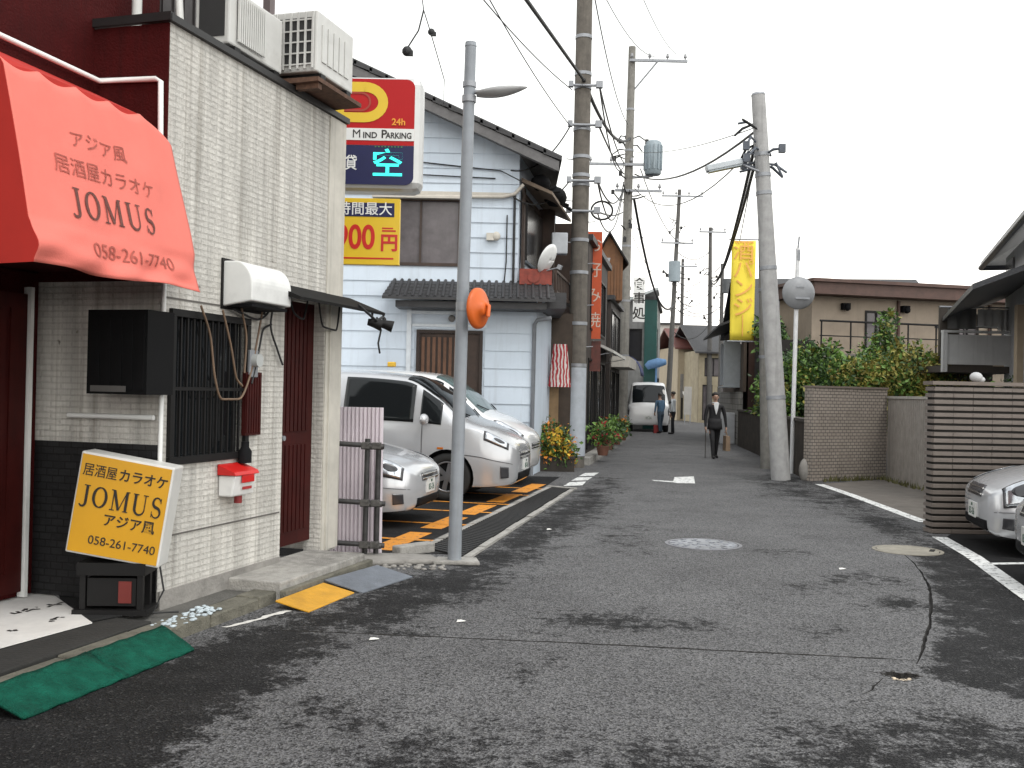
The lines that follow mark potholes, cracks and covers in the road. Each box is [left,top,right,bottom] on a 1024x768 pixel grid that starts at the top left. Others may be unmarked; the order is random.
crack [282,555,933,695]
pothole [880,670,923,682]
manhole cover [665,538,742,550]
manhole cover [872,545,944,556]
